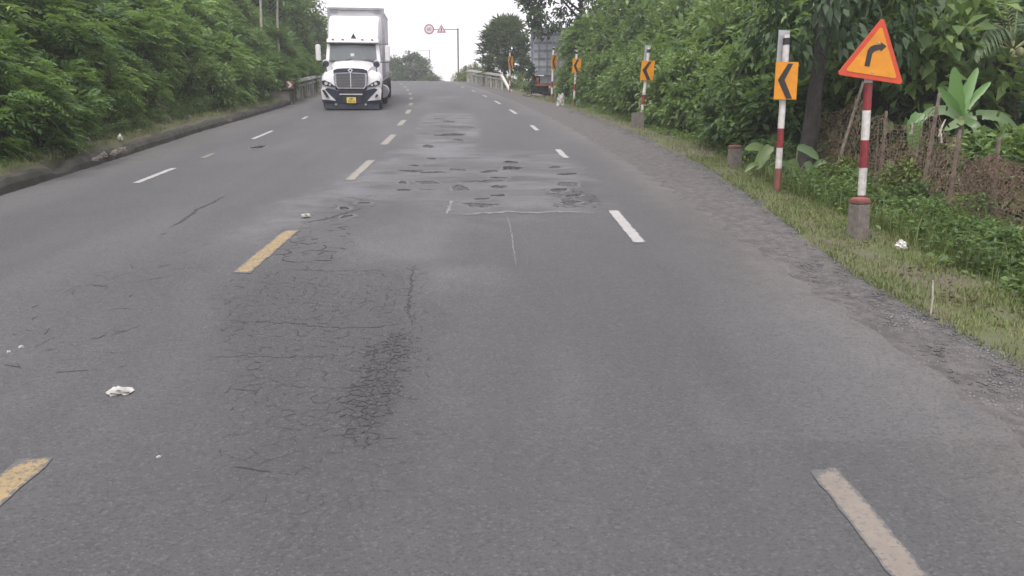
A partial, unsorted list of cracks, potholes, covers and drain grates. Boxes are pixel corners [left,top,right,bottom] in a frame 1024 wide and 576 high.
crack [205,266,441,540]
crack [161,196,225,235]
